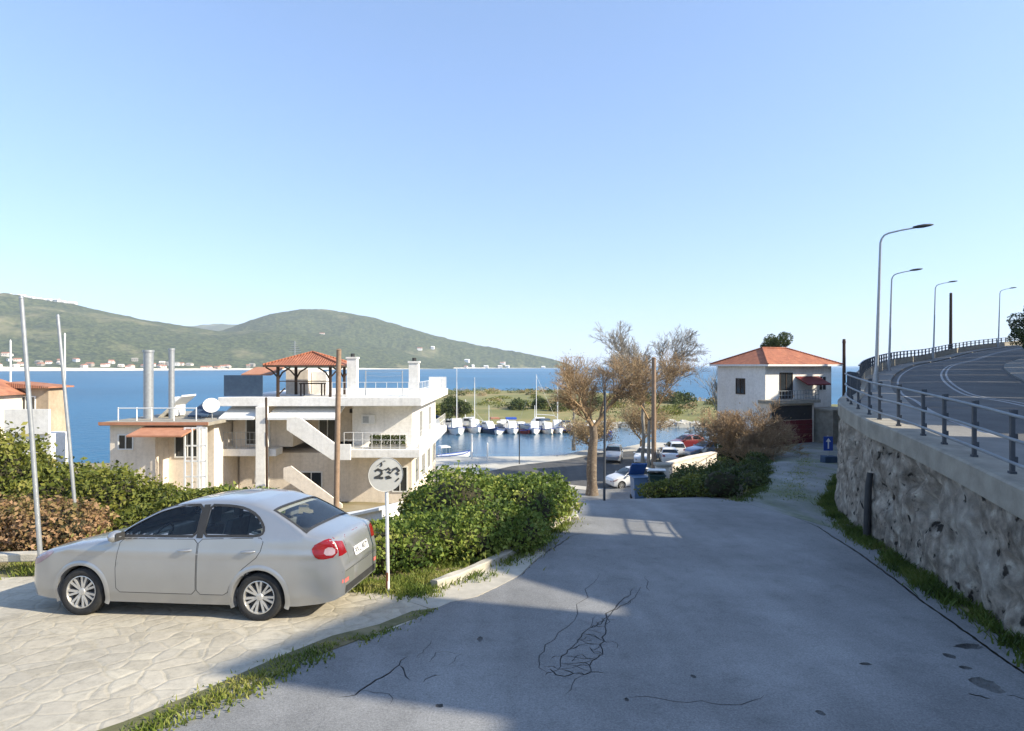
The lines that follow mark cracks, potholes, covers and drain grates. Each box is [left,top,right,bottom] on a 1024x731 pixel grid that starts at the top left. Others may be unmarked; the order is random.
crack [354,642,460,704]
pothole [968,677,1005,694]
crack [538,575,650,694]
